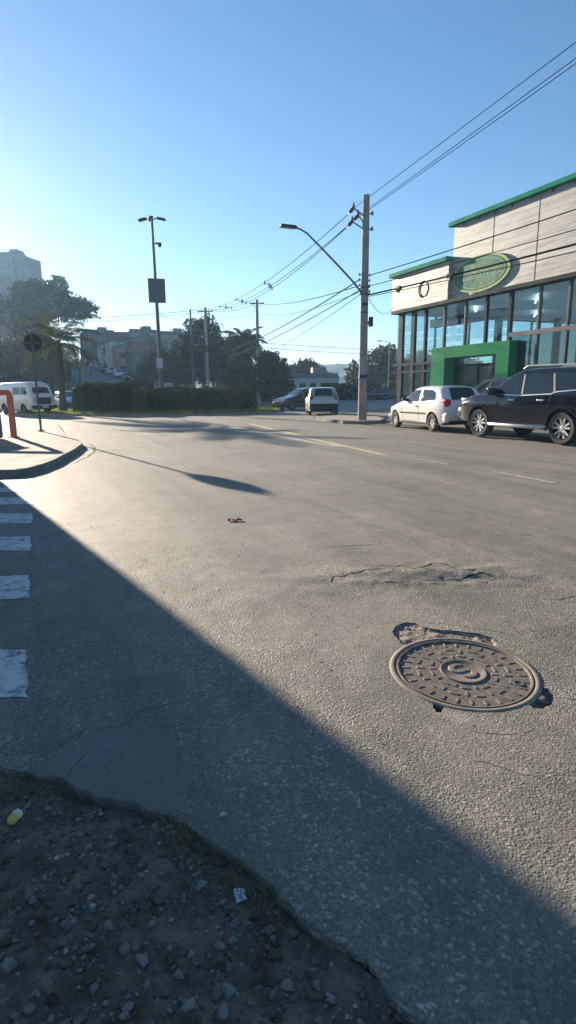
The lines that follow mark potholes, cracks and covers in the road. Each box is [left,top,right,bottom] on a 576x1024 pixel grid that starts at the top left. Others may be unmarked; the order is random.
manhole cover [389,638,542,713]
pothole [392,622,499,647]
crack [36,693,214,757]
